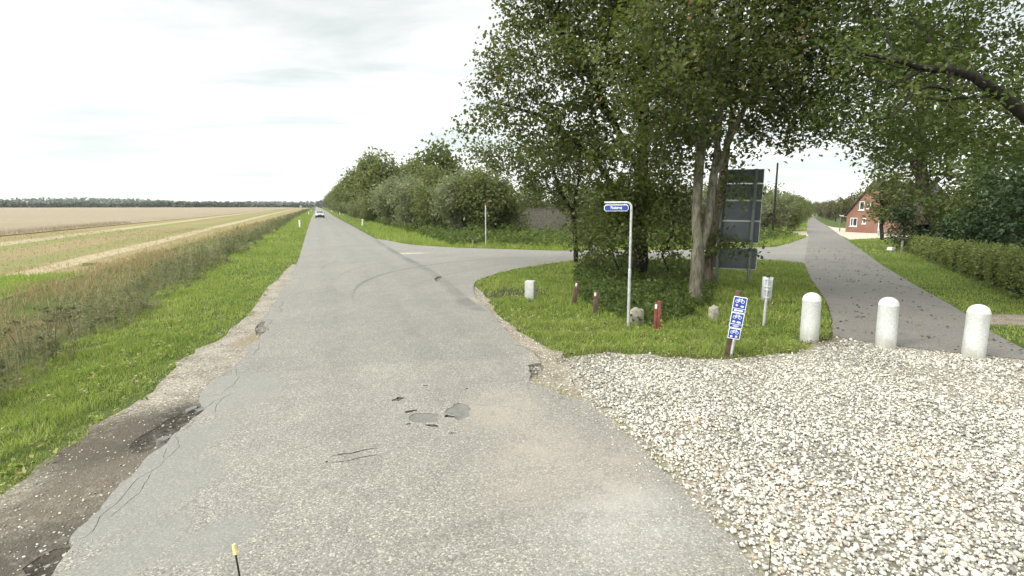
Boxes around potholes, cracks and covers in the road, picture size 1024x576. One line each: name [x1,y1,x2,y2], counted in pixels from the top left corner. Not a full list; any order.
pothole [445,403,471,420]
pothole [409,413,438,423]
pothole [529,365,544,377]
crack [92,370,238,532]
pothole [255,322,268,335]
pothole [128,412,200,457]
